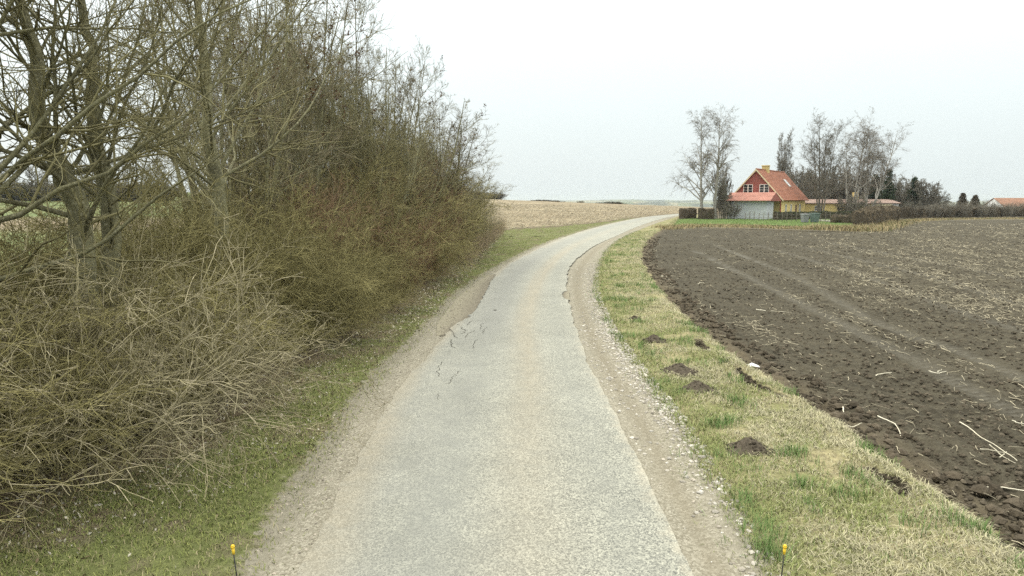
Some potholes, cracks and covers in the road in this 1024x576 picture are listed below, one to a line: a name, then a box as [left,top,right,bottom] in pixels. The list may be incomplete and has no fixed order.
crack [436,322,485,399]
